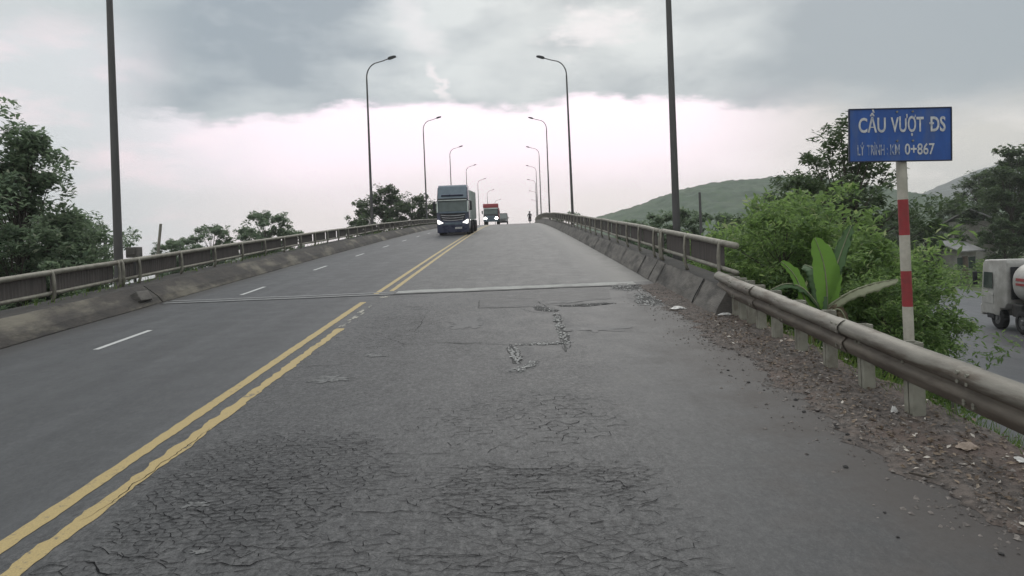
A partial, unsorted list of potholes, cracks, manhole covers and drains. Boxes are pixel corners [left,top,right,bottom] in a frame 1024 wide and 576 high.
crack [336,306,625,460]
crack [28,429,735,576]
